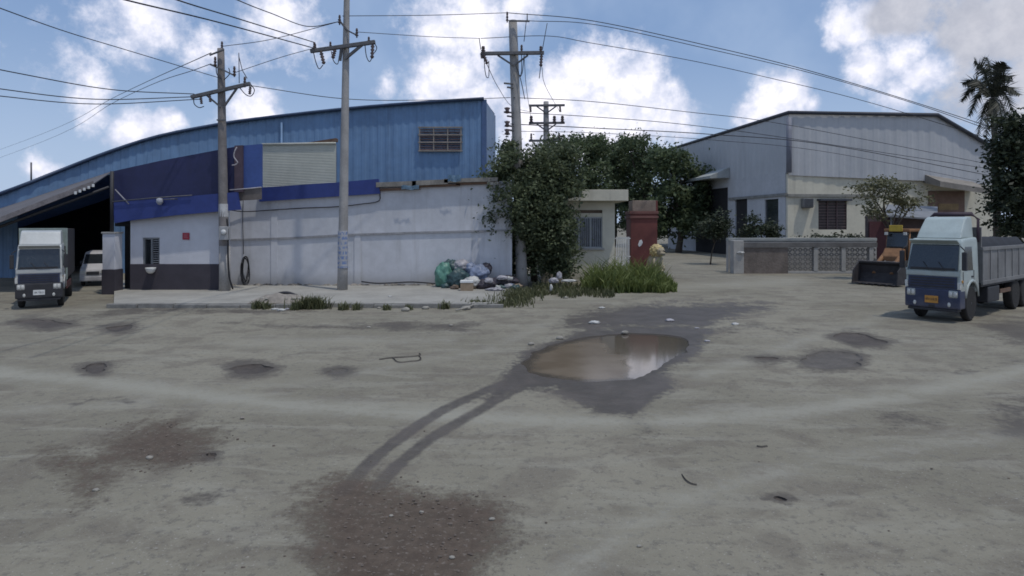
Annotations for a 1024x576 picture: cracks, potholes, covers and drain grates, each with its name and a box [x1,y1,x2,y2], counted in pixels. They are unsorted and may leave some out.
pothole [15,319,73,328]
pothole [229,364,274,374]
pothole [82,363,107,374]
pothole [833,332,888,345]
pothole [521,333,689,372]
pothole [800,351,863,369]
